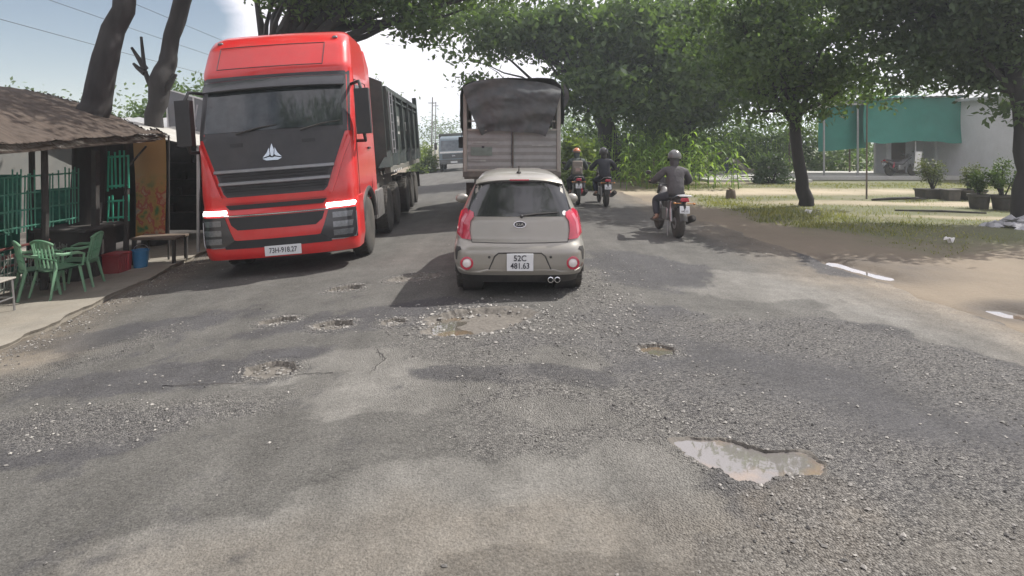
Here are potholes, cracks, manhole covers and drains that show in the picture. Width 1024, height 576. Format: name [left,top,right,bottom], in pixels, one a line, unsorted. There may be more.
pothole [371,316,416,330]
pothole [320,283,372,295]
pothole [230,357,309,384]
pothole [303,318,364,334]
crack [370,349,389,373]
pothole [651,430,848,496]
pothole [248,314,308,328]
pothole [626,341,688,361]
pothole [380,272,447,285]
pothole [406,303,549,341]
